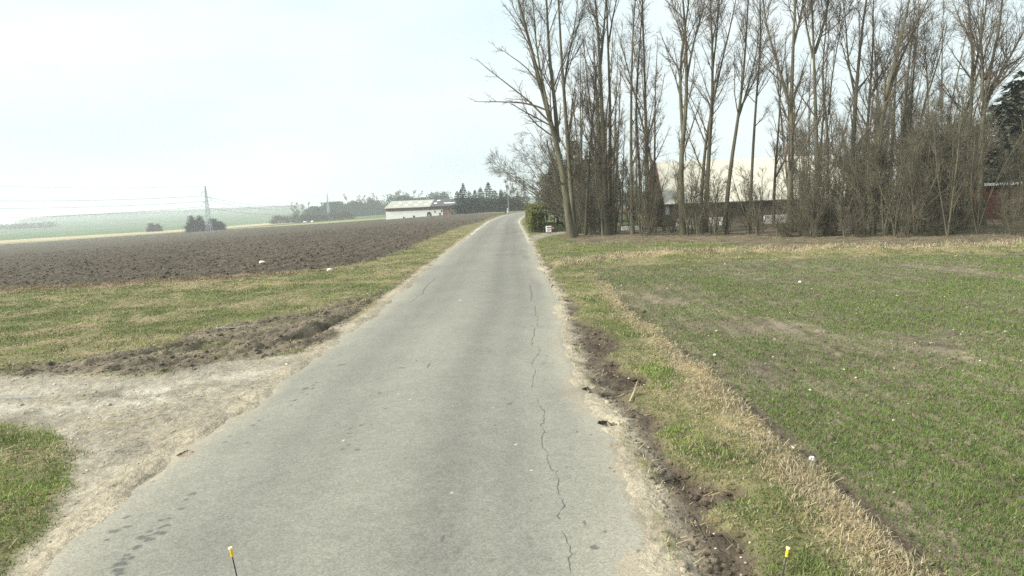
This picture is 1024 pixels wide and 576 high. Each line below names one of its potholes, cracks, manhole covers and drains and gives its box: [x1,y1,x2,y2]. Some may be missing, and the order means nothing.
crack [520,285,572,569]
